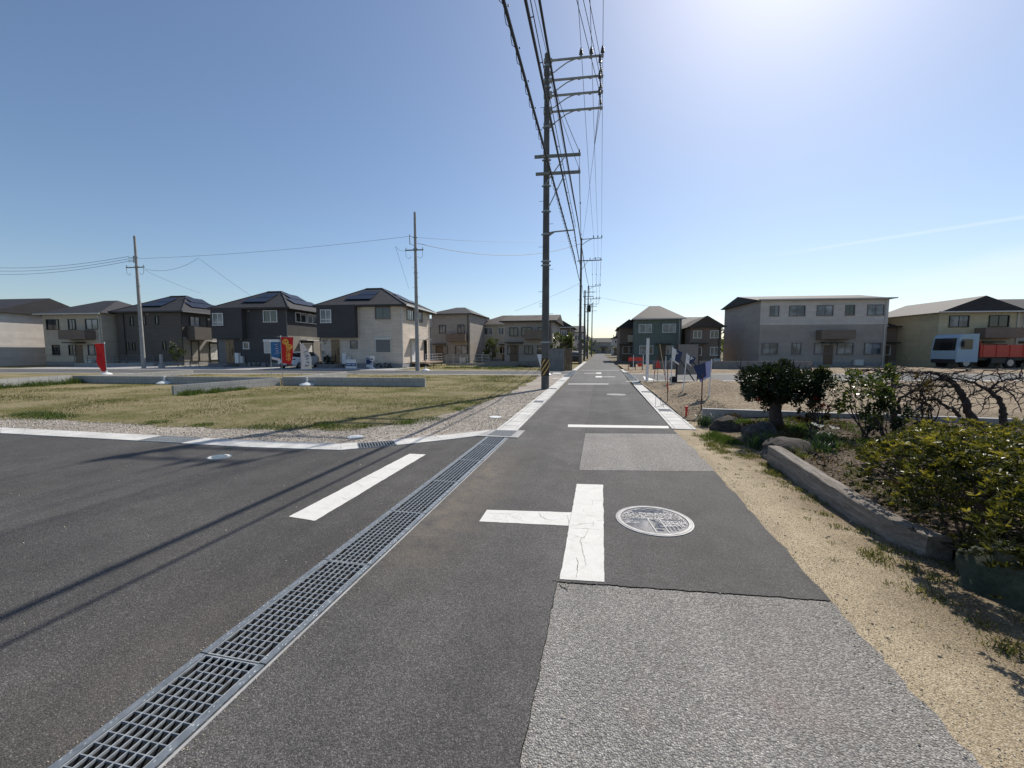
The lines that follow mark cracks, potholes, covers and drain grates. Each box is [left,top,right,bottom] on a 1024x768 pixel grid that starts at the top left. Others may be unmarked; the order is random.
drain grate [48,653,264,768]
drain grate [457,444,499,461]
drain grate [429,459,483,482]
drain grate [477,437,507,446]
drain grate [138,436,202,444]
drain grate [324,510,426,566]
drain grate [201,560,371,667]
drain grate [357,440,396,449]
manhole cover [616,506,695,537]
drain grate [390,480,460,514]
